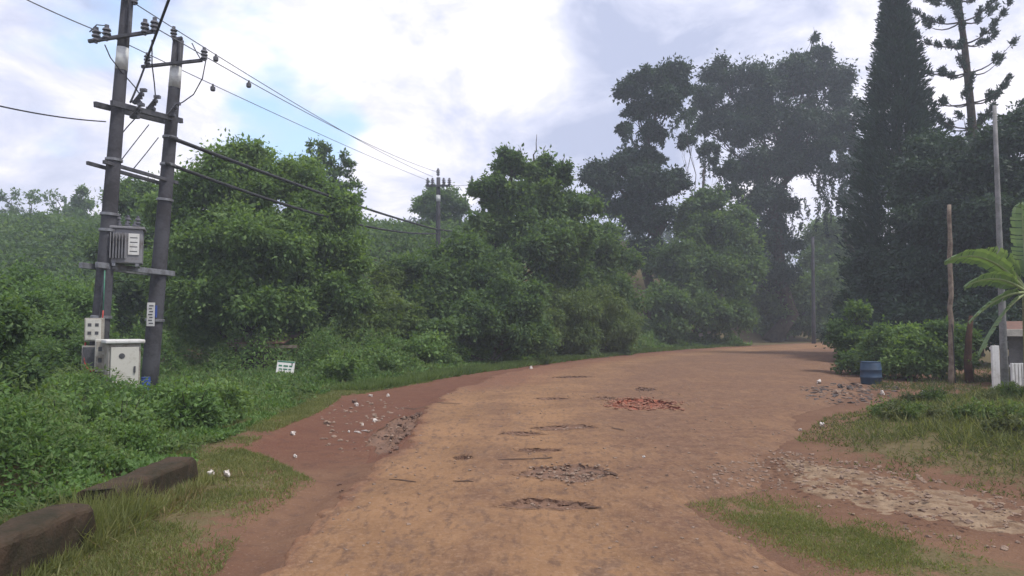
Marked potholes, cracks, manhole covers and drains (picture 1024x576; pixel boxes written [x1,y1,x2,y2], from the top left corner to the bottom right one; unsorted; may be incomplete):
pothole [353,410,426,463]
pothole [492,497,599,512]
pothole [511,462,616,484]
pothole [603,396,685,411]
